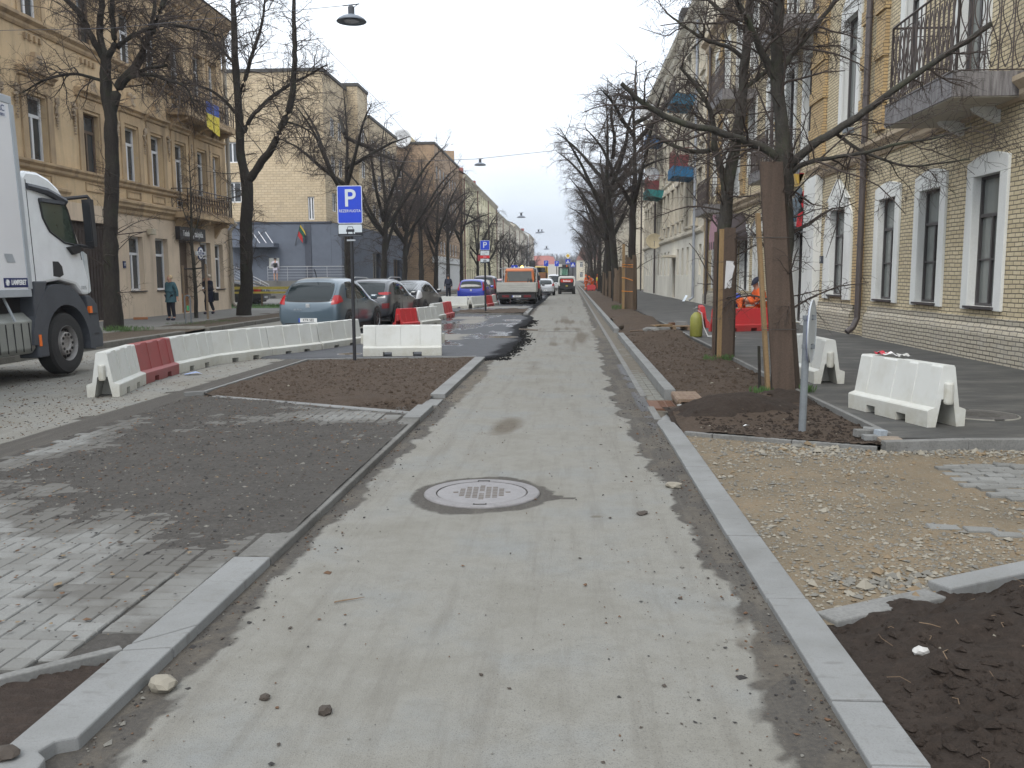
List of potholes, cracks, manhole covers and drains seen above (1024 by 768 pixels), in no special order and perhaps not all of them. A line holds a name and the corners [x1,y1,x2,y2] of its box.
manhole cover [424,479,540,509]
manhole cover [965,409,1021,421]
